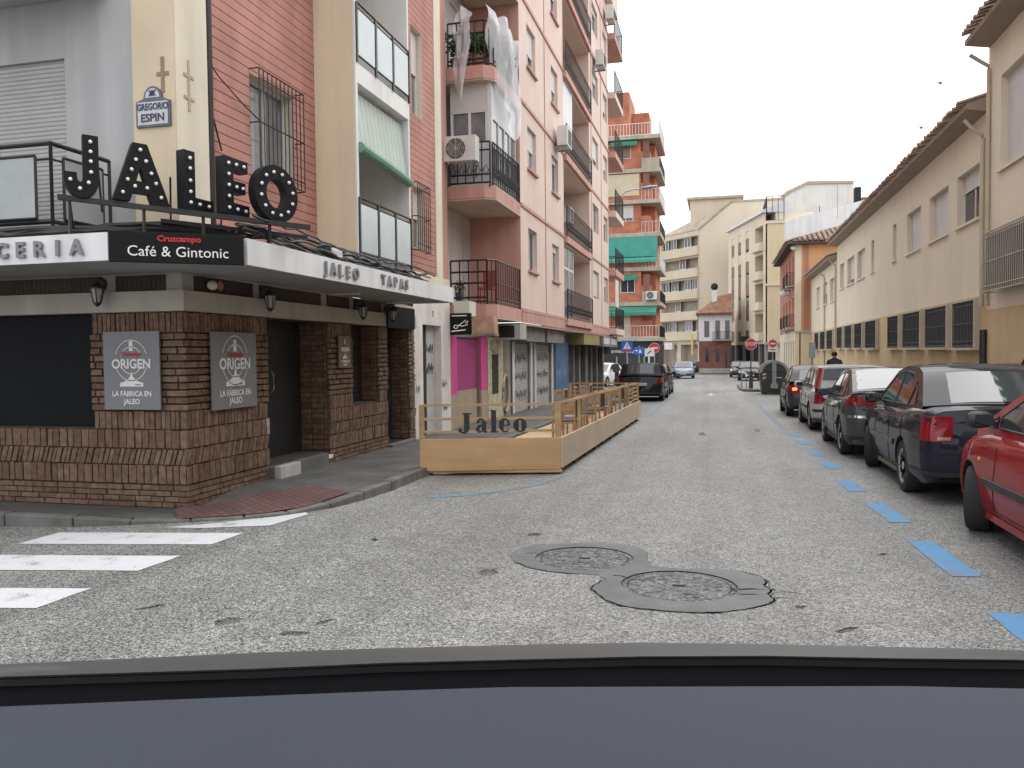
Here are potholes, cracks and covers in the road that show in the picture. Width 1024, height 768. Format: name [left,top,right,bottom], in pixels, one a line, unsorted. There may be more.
manhole cover [622,572,737,602]
pothole [214,617,244,625]
manhole cover [536,548,633,574]
